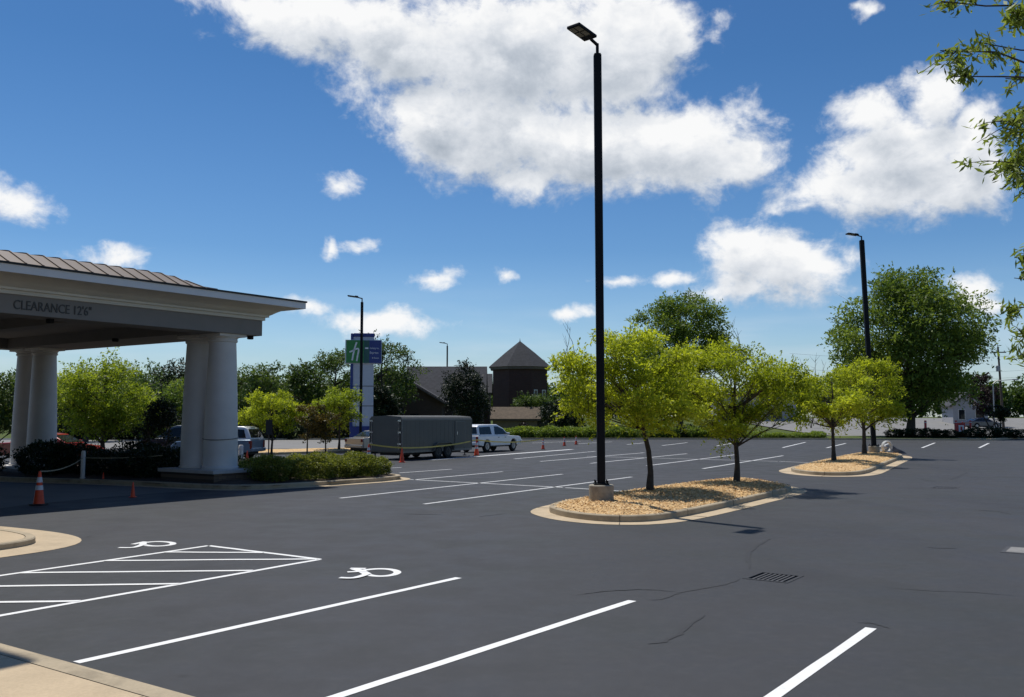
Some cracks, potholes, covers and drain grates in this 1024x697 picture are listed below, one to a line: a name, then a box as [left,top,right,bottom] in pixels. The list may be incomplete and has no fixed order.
drain grate [742,571,803,583]
crack [578,539,769,644]
